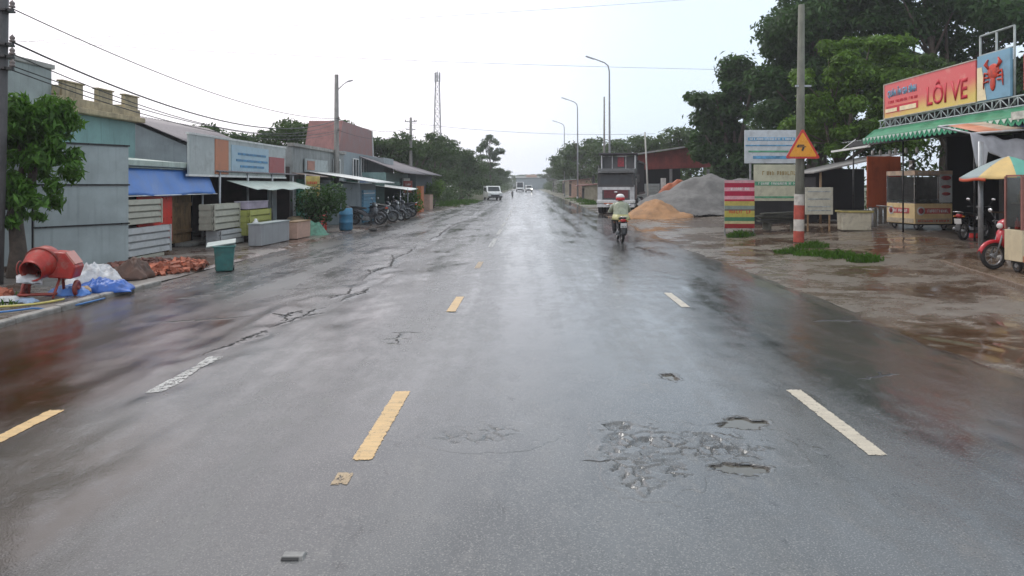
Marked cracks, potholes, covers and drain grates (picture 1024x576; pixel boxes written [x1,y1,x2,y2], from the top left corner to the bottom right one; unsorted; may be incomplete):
pothole [709,415,775,432]
crack [158,307,327,355]
pothole [702,460,778,480]
crack [384,332,420,345]
crack [415,417,562,454]
pothole [655,373,685,383]
crack [582,411,823,507]
